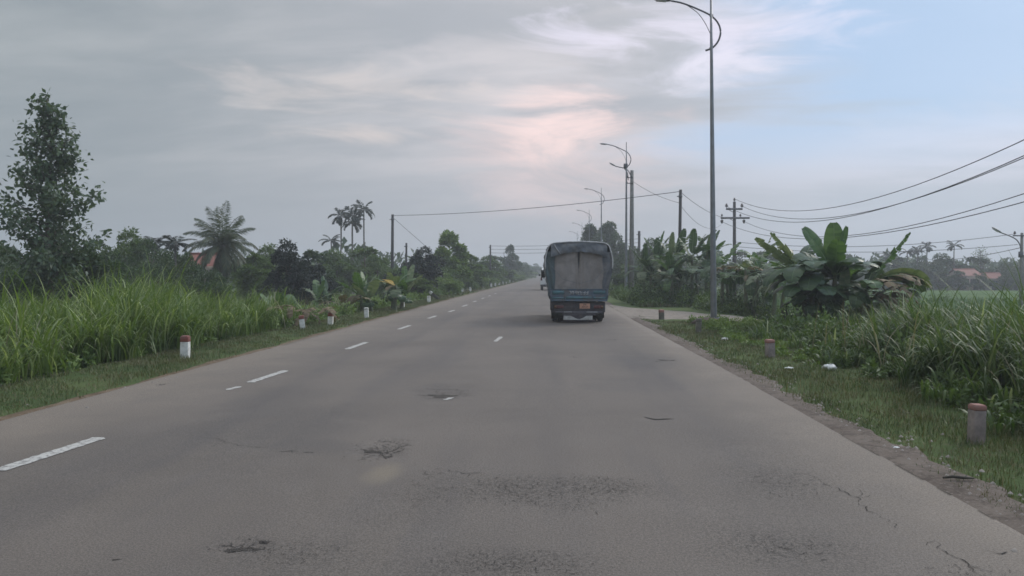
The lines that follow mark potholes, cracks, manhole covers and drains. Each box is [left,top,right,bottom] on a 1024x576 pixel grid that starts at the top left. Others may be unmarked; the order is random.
crack [725,463,897,526]
crack [913,540,1011,576]
pothole [214,538,281,553]
pothole [342,439,409,461]
